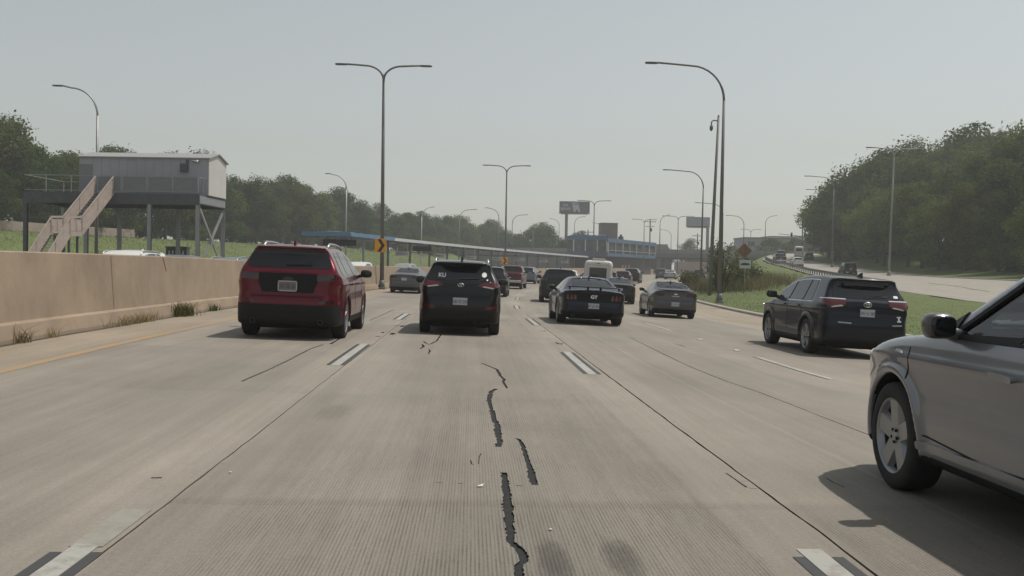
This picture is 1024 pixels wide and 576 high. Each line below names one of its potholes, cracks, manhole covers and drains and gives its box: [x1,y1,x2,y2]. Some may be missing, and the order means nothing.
crack [435,363,538,576]
